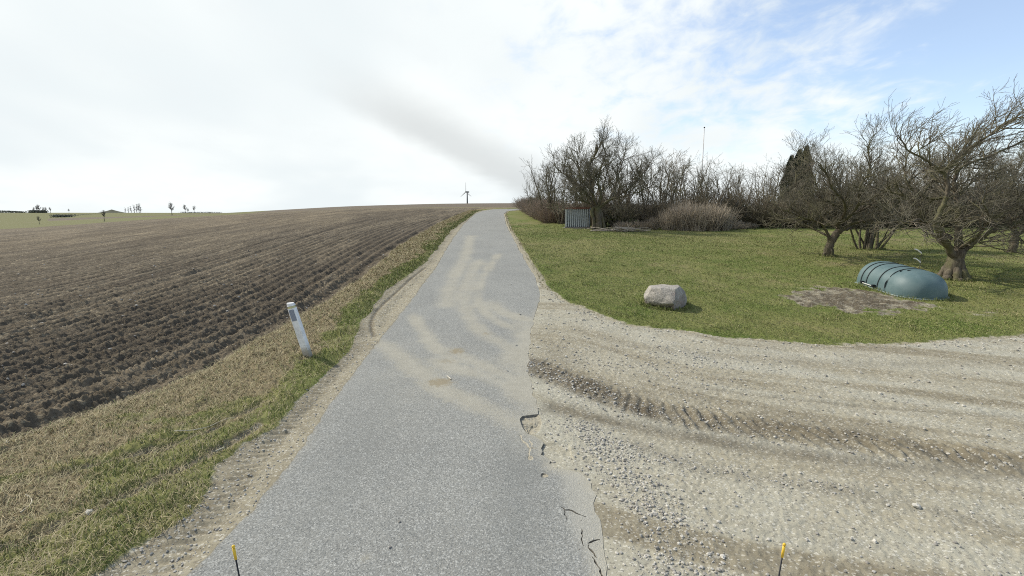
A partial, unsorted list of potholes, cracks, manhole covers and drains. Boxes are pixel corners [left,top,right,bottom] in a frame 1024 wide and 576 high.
pothole [520,414,541,435]
crack [519,435,536,460]
crack [561,507,603,576]
